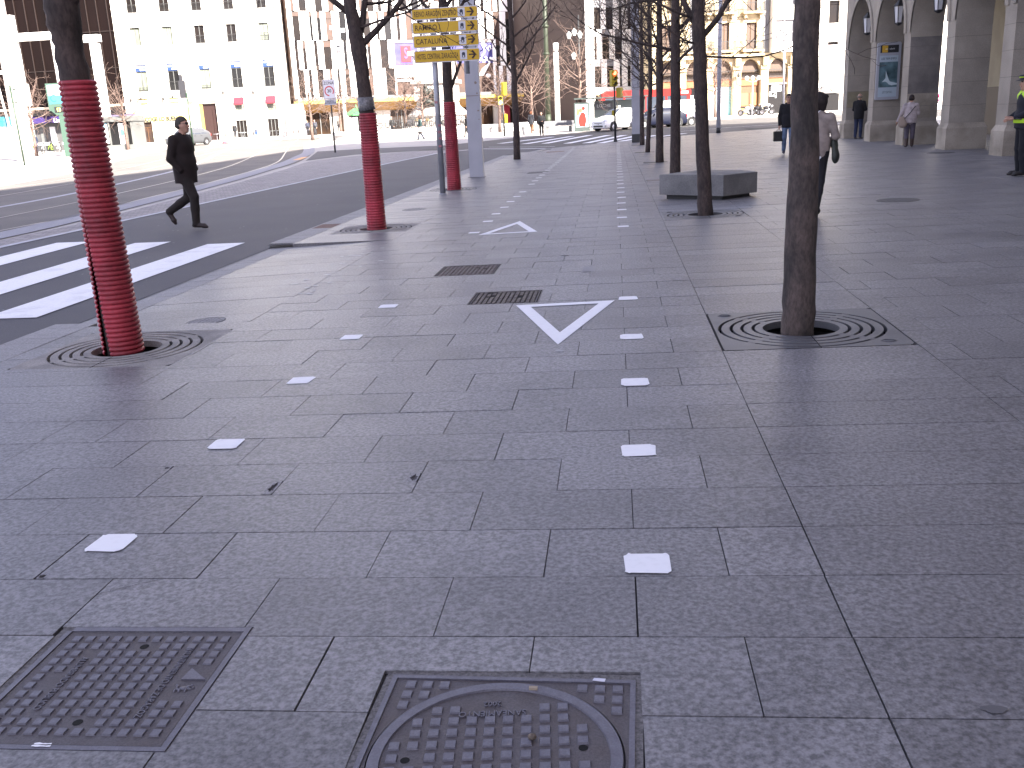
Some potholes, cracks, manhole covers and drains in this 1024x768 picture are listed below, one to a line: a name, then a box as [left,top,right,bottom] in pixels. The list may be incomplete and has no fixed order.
manhole cover [346,671,643,768]
manhole cover [0,627,253,754]
